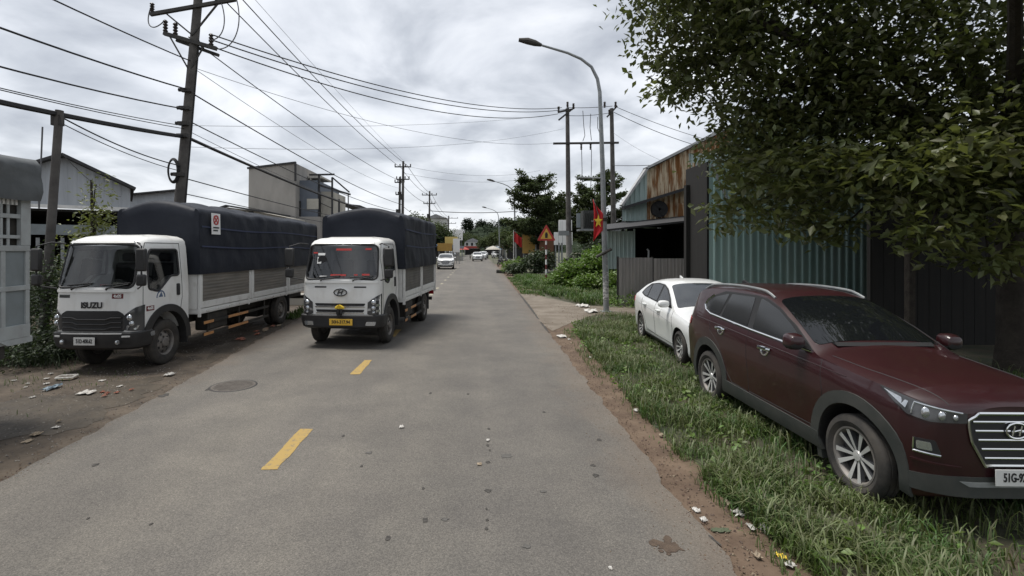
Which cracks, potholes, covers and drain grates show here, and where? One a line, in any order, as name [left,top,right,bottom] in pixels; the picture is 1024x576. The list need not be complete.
pothole [652,535,685,553]
manhole cover [209,380,258,392]
